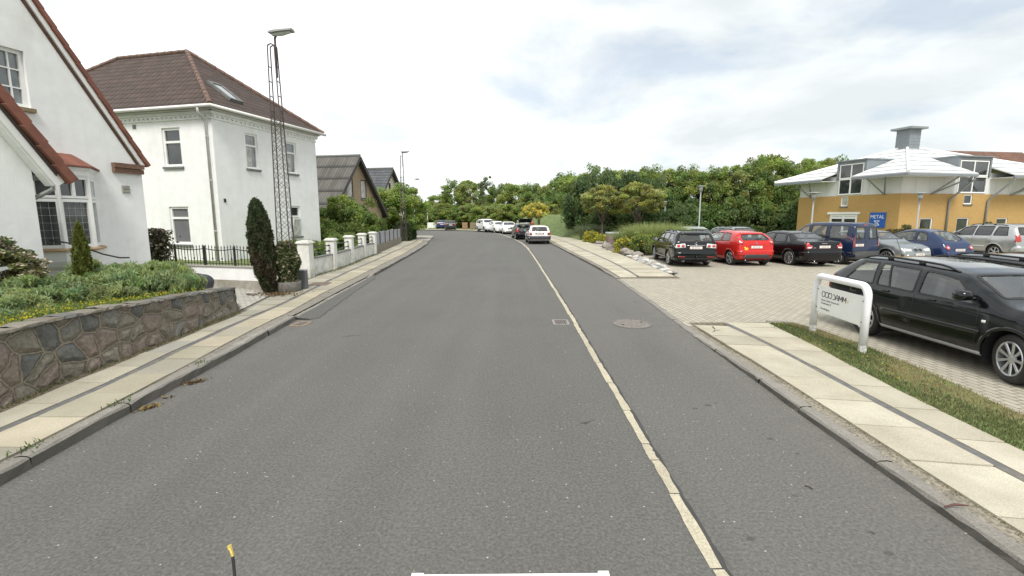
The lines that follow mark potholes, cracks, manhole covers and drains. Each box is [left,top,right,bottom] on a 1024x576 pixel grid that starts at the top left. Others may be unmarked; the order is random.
manhole cover [612,319,652,329]
